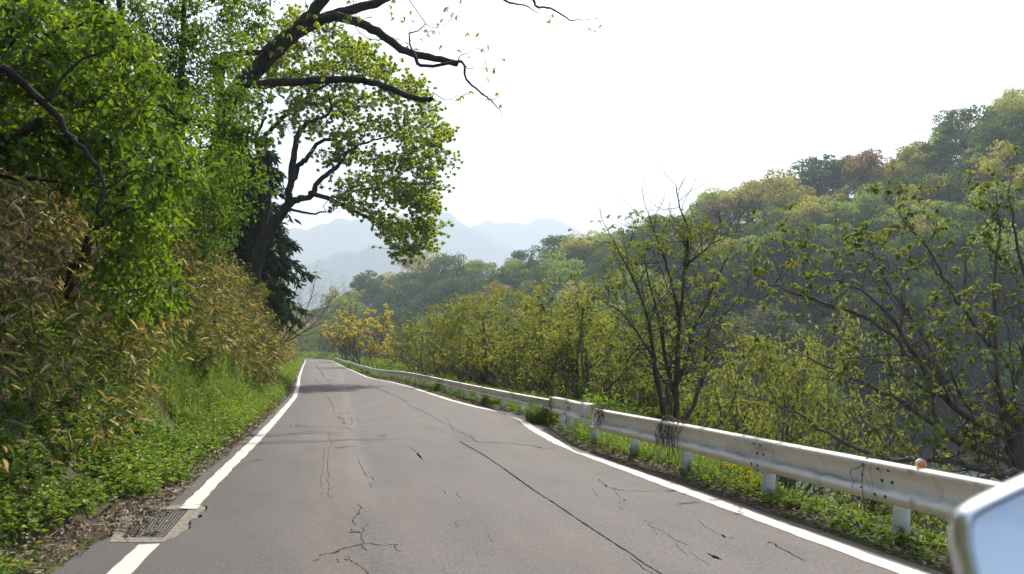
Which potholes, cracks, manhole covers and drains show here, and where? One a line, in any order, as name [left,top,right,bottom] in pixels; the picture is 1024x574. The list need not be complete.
crack [313,460,401,574]
crack [305,364,352,498]
